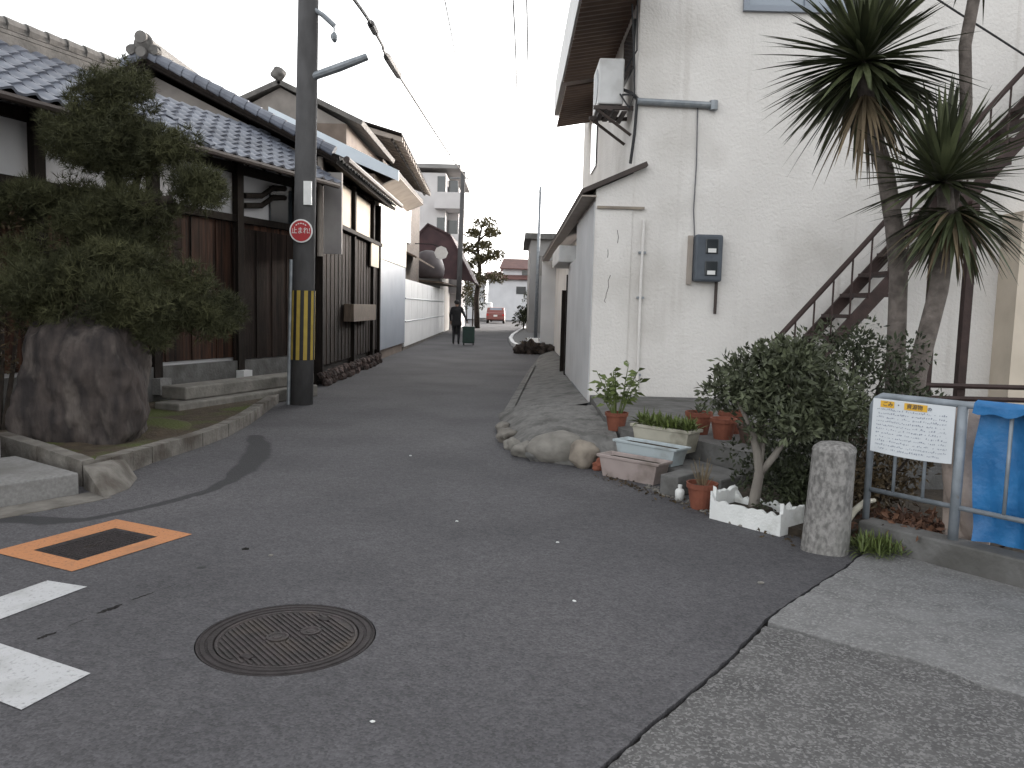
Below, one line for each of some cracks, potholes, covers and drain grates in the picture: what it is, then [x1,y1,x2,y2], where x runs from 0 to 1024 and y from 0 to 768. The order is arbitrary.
manhole cover [195,604,375,676]
crack [37,585,173,640]
